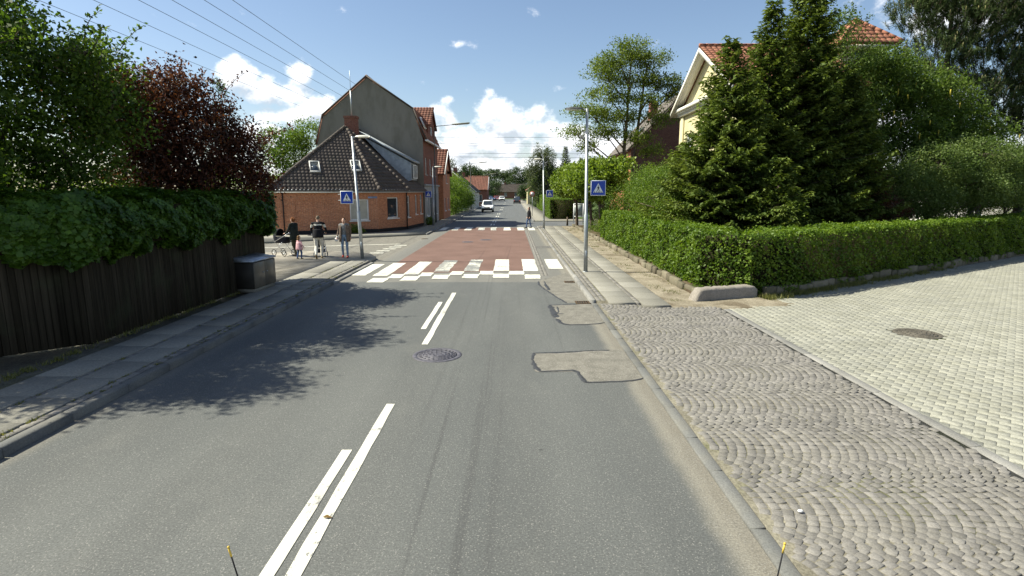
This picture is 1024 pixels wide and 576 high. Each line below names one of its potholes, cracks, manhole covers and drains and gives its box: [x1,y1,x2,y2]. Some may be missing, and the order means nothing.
manhole cover [892,328,944,339]
manhole cover [412,348,462,362]
